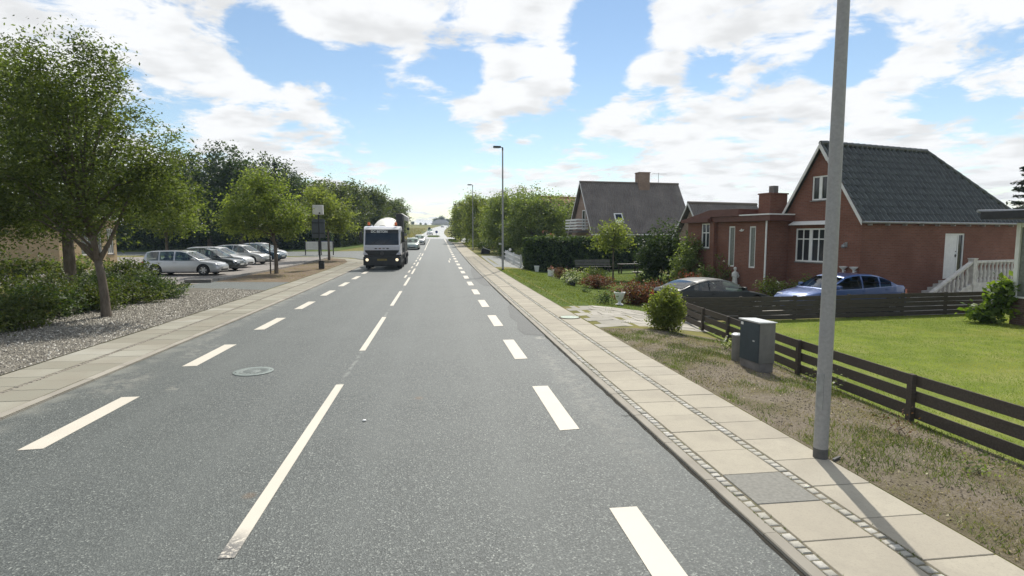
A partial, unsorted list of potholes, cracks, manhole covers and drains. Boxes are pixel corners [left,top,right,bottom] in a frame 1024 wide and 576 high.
manhole cover [232,367,274,376]
